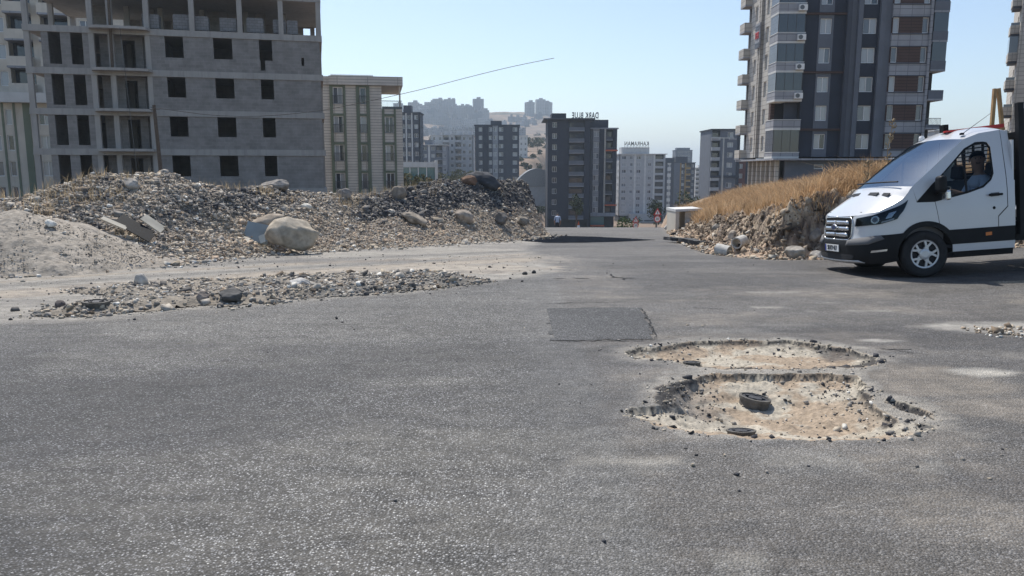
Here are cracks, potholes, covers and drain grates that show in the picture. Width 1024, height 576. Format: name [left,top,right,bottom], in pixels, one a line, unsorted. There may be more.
pothole [624,339,879,370]
pothole [623,373,937,441]
